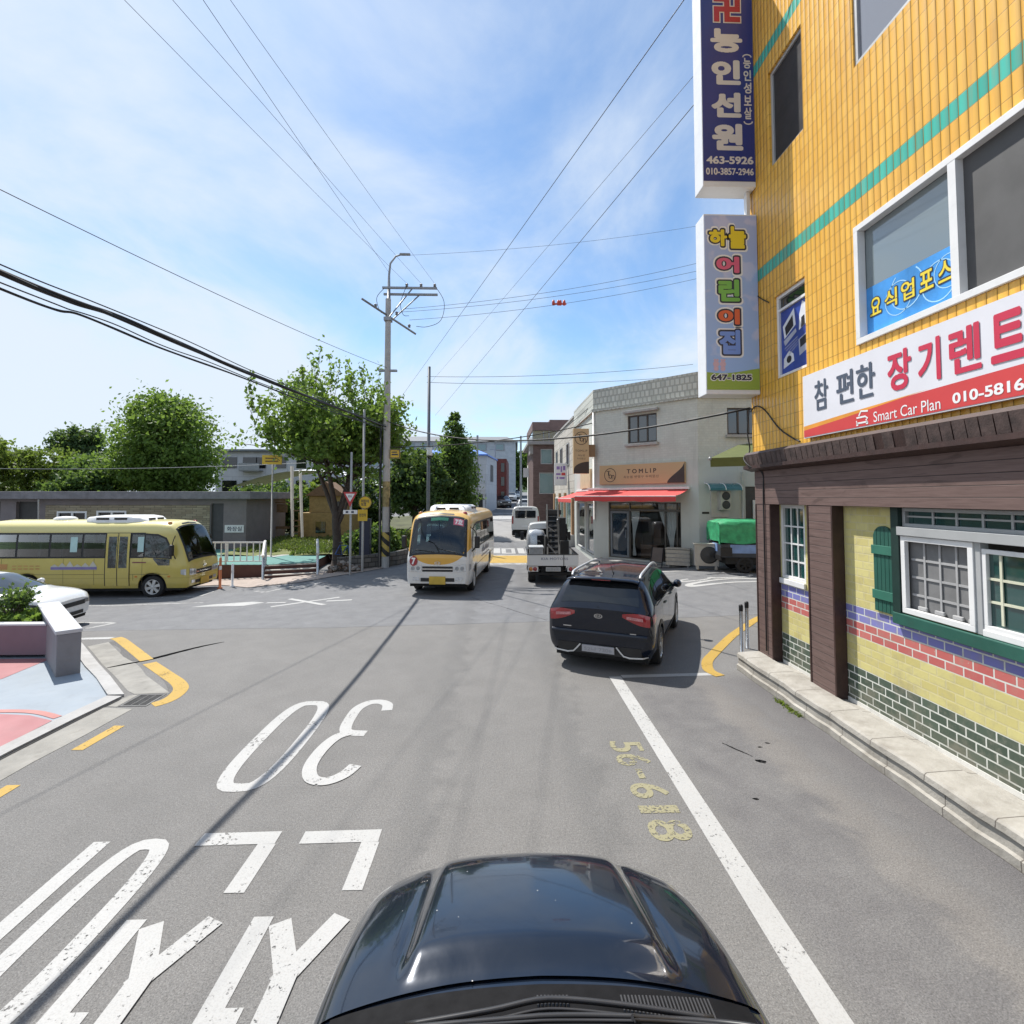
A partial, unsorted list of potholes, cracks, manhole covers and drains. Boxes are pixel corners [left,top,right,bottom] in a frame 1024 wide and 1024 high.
drain grate [118,694,166,707]
